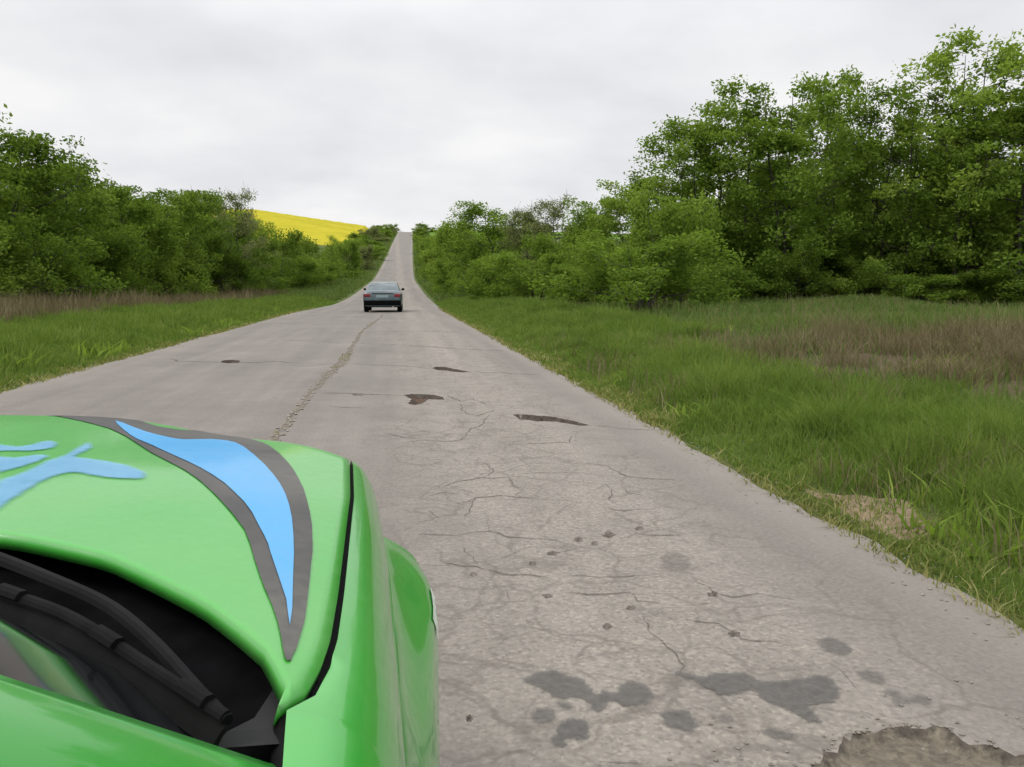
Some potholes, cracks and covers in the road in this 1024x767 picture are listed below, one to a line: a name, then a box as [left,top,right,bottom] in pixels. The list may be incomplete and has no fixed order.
pothole [513,414,588,426]
pothole [404,394,444,405]
pothole [811,725,1024,767]
crack [269,314,383,441]
